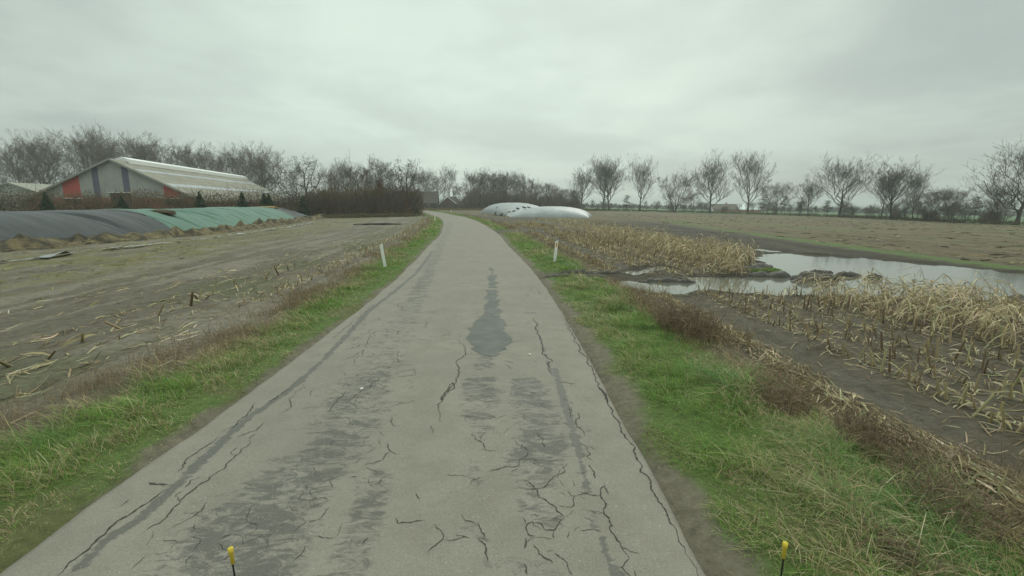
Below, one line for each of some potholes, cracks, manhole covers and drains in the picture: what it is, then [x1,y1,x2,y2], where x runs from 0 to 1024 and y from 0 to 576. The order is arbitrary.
crack [460,324,699,576]
crack [59,243,476,574]
